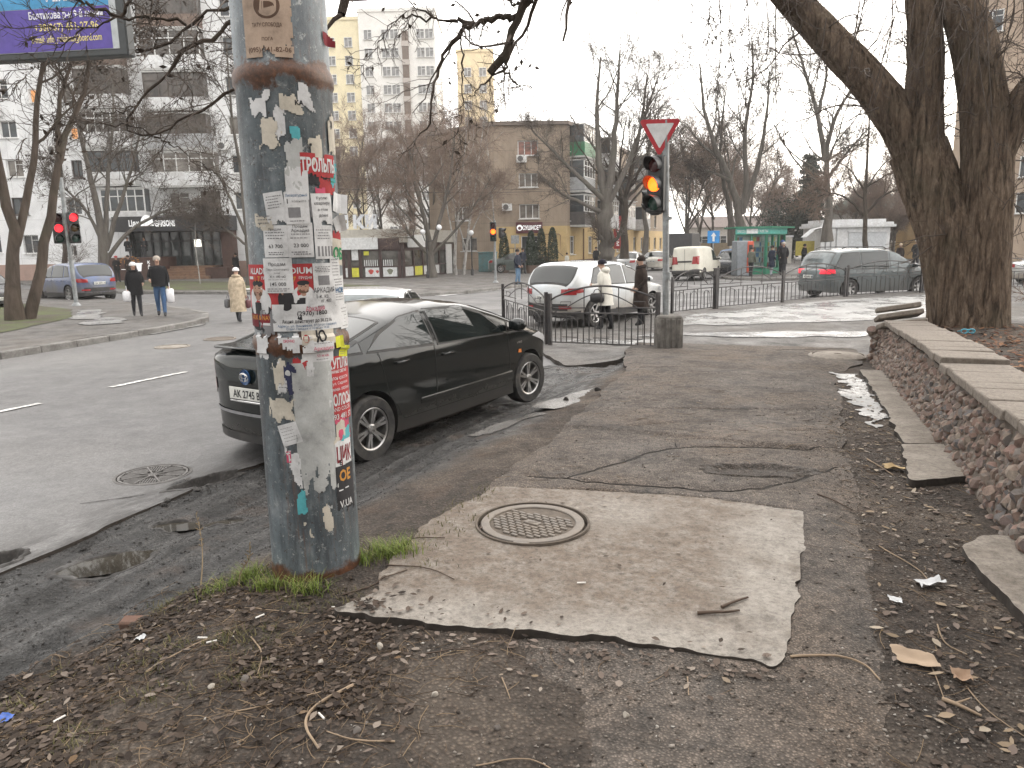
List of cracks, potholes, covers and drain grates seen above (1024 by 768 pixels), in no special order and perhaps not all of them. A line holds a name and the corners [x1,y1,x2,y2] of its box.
pothole [0,547,31,568]
pothole [699,462,822,479]
pothole [148,519,204,535]
manhole cover [808,351,868,362]
manhole cover [475,502,590,547]
crack [528,430,843,492]
pothole [44,549,161,581]
